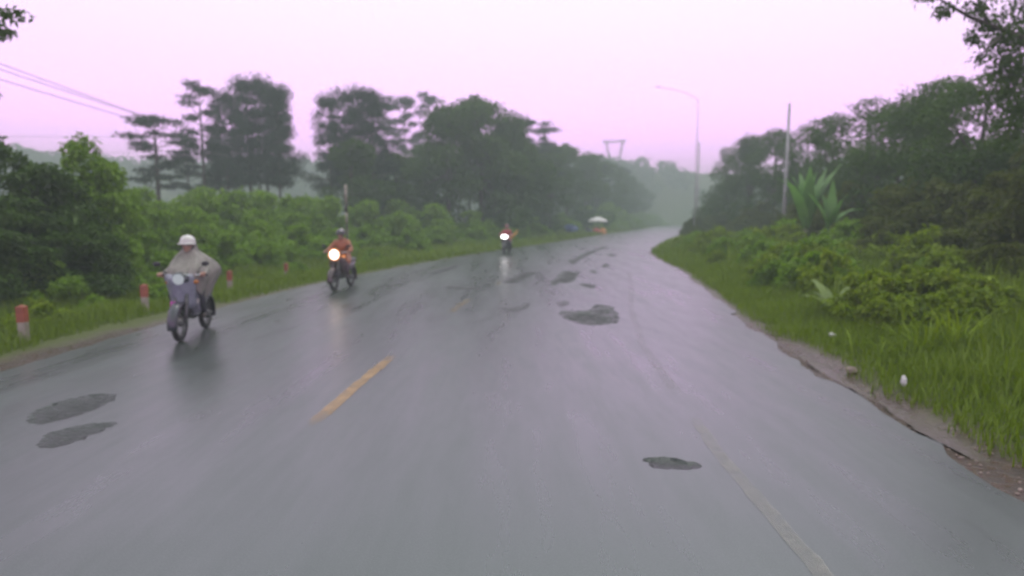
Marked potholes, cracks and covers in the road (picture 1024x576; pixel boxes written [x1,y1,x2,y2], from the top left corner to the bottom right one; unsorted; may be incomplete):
pothole [548,270,581,286]
pothole [560,304,620,326]
